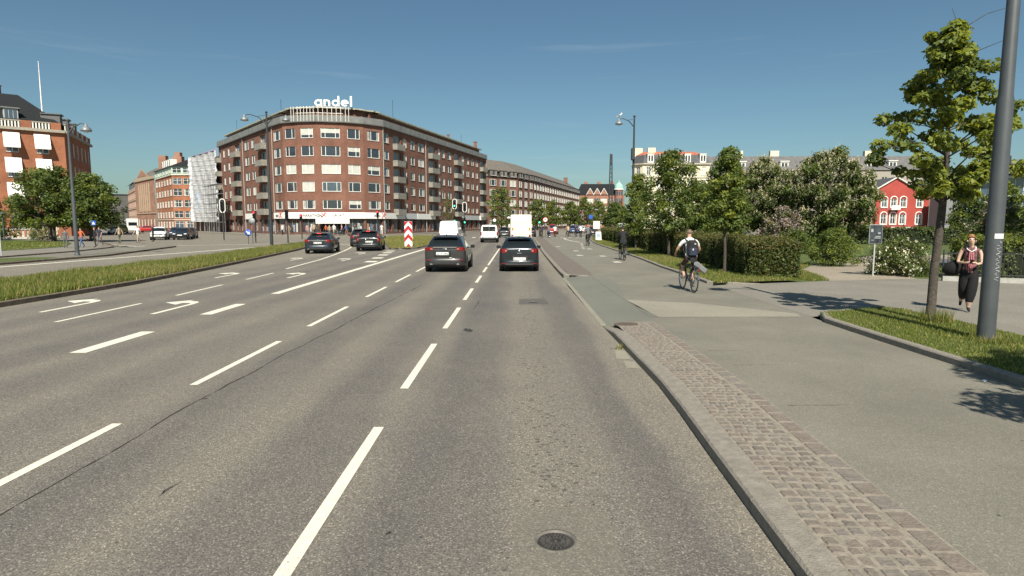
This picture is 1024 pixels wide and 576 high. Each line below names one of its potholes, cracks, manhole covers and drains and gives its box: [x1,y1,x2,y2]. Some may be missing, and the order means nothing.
manhole cover [534,530,577,551]
